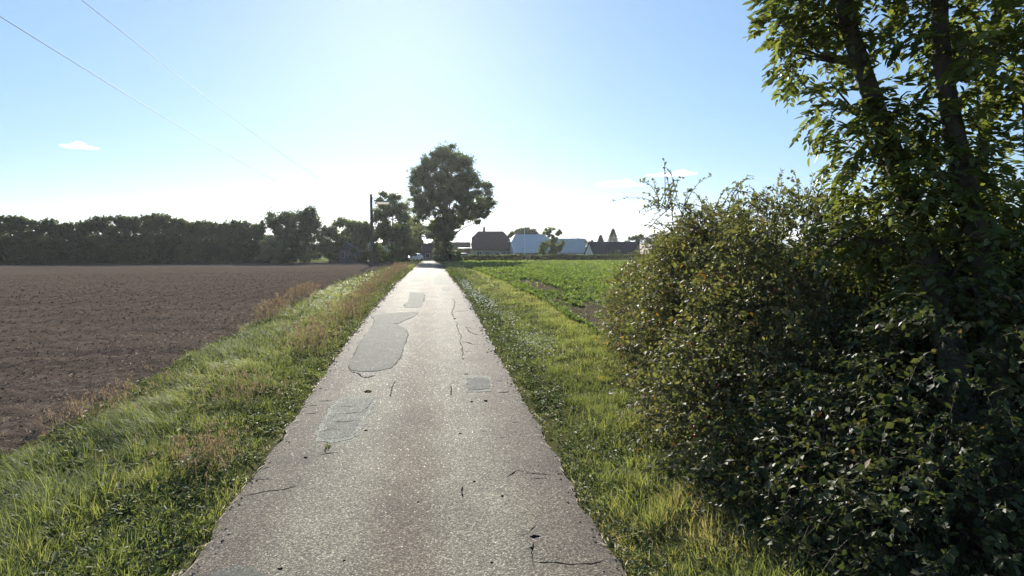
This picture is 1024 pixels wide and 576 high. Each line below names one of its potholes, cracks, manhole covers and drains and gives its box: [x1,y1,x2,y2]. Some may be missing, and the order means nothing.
crack [522,527,602,566]
crack [244,479,296,496]
crack [451,301,478,357]
